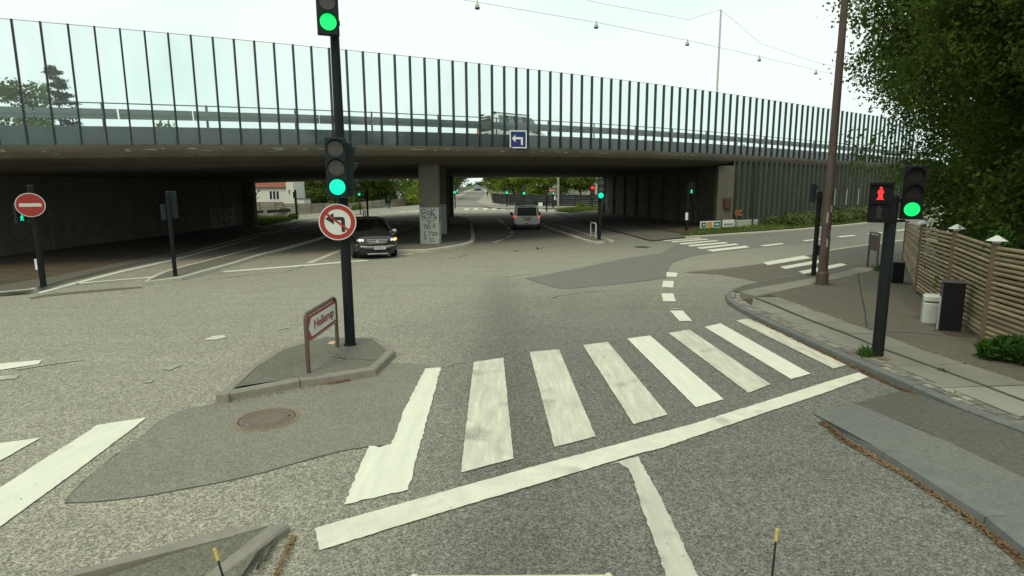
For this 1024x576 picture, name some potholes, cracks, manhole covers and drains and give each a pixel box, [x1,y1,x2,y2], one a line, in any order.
manhole cover [233,407,299,431]
